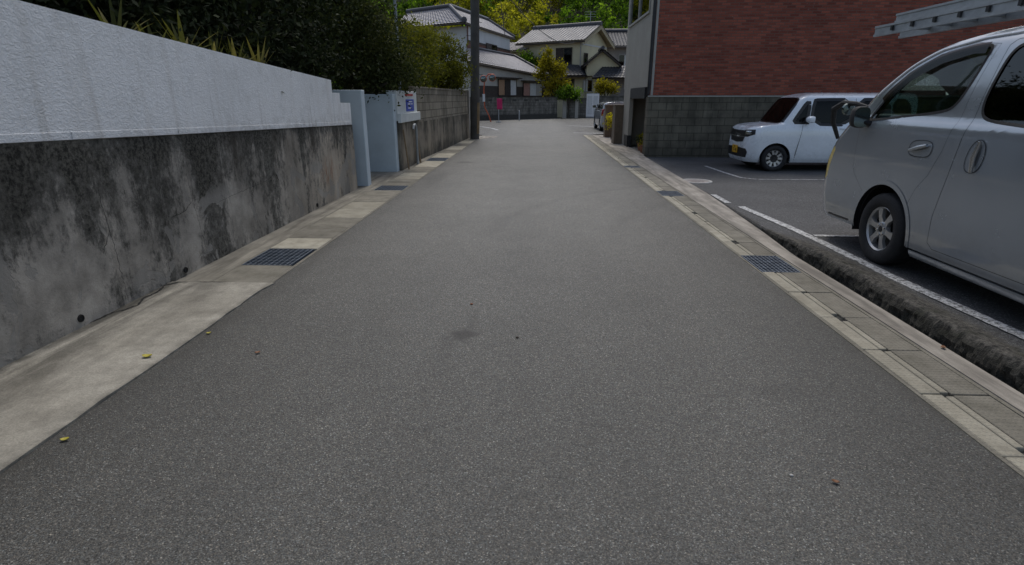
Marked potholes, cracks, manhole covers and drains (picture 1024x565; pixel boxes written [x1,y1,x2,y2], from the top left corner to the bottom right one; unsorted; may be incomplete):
drain grate [242,249,314,266]
drain grate [741,255,801,273]
